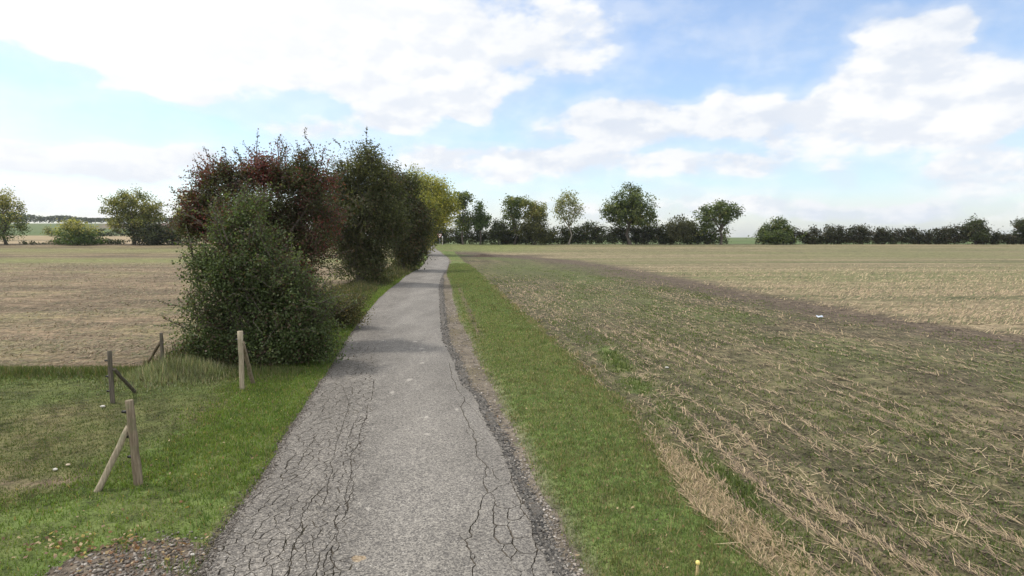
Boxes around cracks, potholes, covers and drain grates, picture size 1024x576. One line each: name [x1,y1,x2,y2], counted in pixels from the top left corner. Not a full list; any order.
crack [204,343,379,576]
crack [449,363,539,576]
